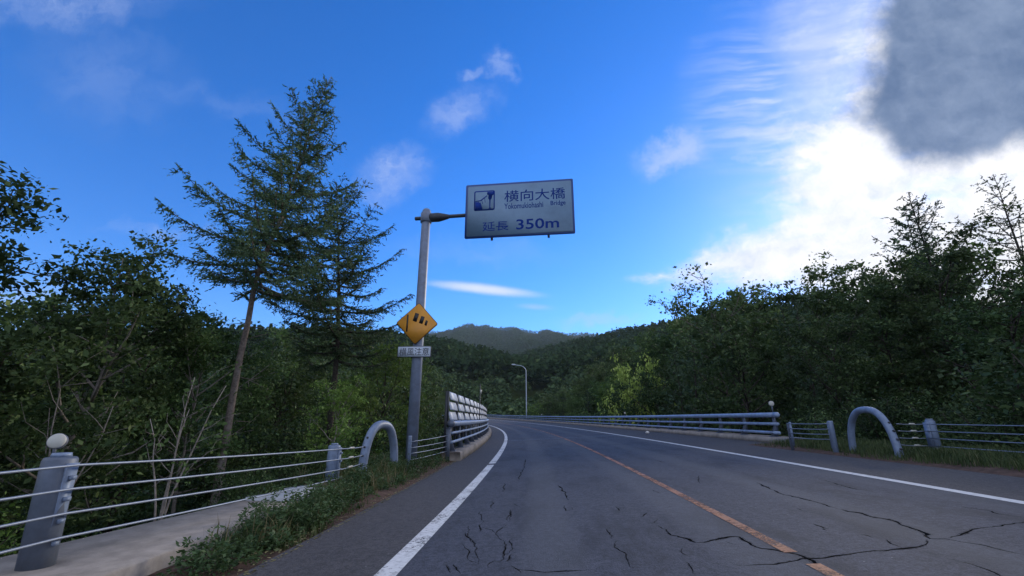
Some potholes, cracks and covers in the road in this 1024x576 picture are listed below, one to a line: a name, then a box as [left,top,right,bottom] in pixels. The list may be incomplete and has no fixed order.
crack [446,459,597,574]
crack [642,484,1024,575]
